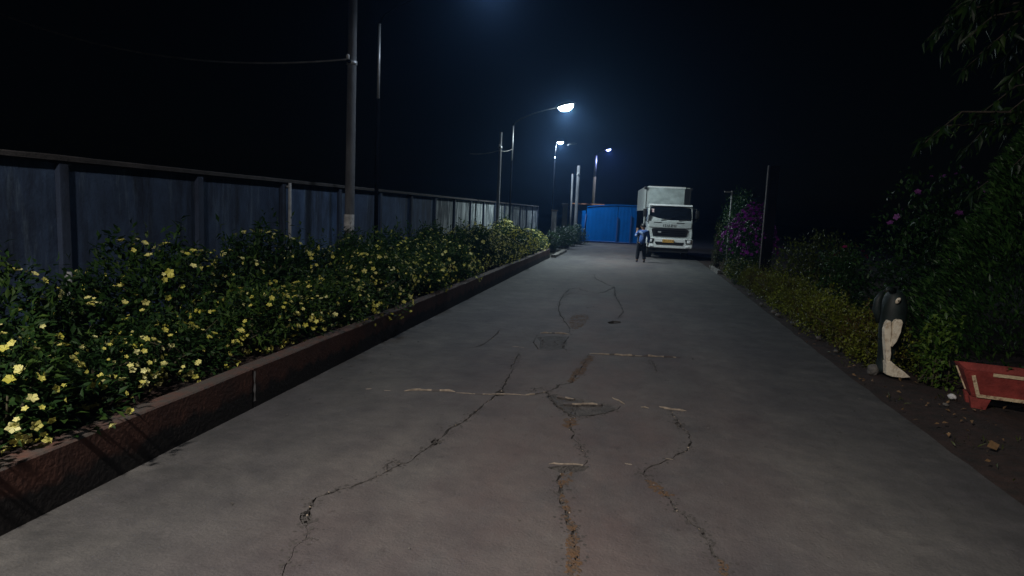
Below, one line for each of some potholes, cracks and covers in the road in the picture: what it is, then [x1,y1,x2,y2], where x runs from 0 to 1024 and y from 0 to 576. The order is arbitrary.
crack [266,276,626,576]
pothole [549,394,618,416]
crack [634,410,740,576]
